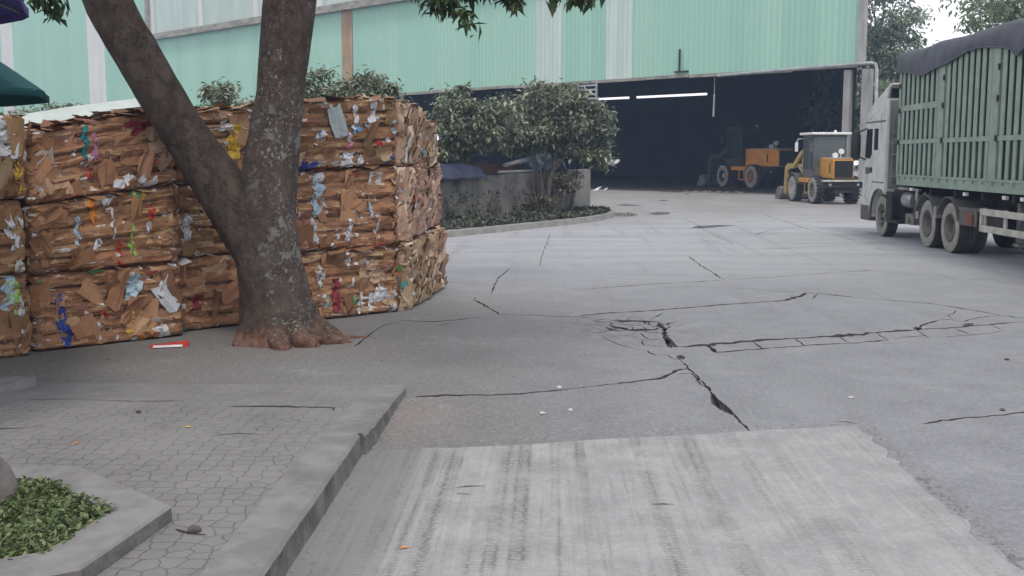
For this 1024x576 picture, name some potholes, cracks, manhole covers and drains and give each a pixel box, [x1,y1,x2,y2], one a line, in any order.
crack [416,288,1024,397]
crack [354,269,567,346]
